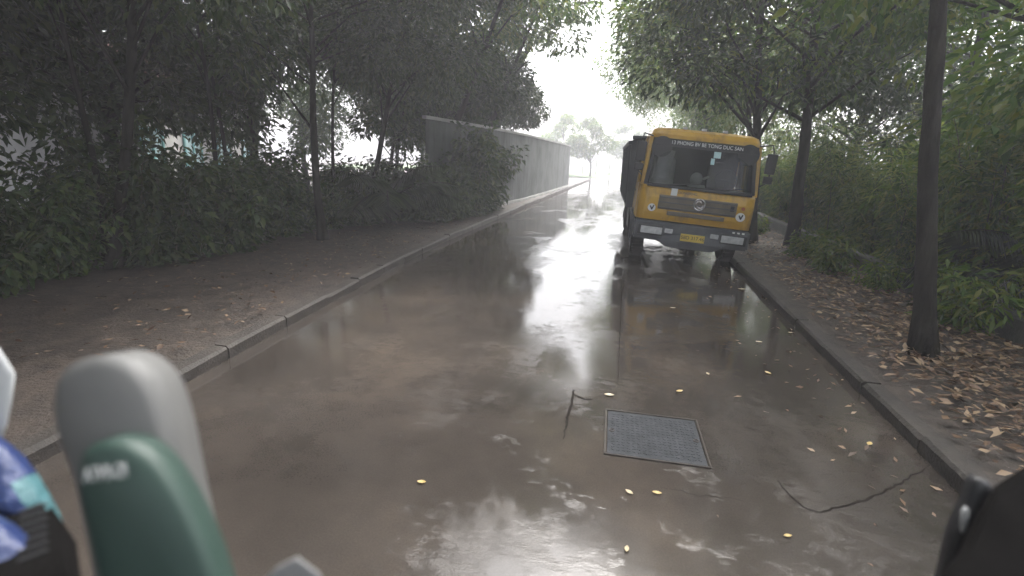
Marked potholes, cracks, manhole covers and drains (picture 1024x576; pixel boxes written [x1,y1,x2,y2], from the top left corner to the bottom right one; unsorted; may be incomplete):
manhole cover [604,409,712,469]
crack [778,468,925,513]
crack [563,390,593,439]
